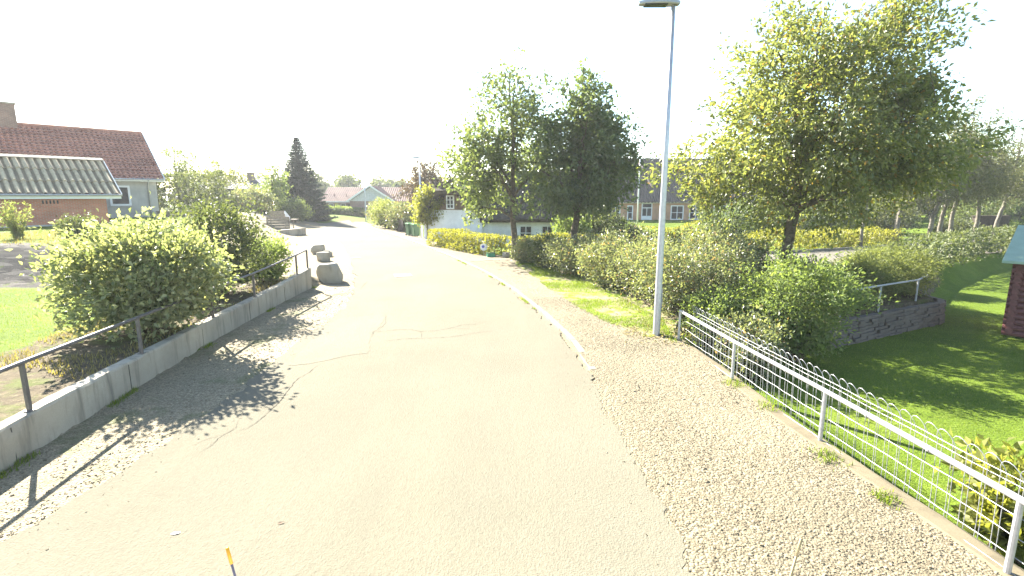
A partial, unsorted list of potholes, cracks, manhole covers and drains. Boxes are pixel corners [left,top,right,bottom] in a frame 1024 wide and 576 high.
crack [188,366,316,453]
